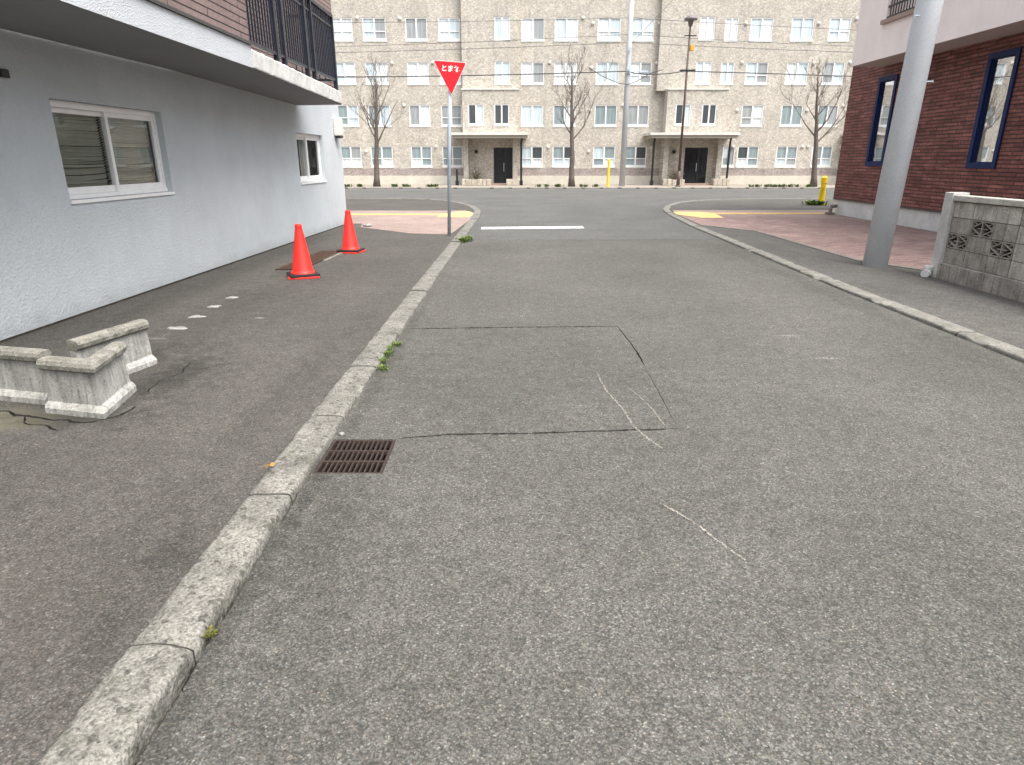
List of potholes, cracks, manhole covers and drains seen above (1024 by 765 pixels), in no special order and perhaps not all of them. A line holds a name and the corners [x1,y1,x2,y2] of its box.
drain grate [314,440,396,473]
crack [0,364,189,431]
